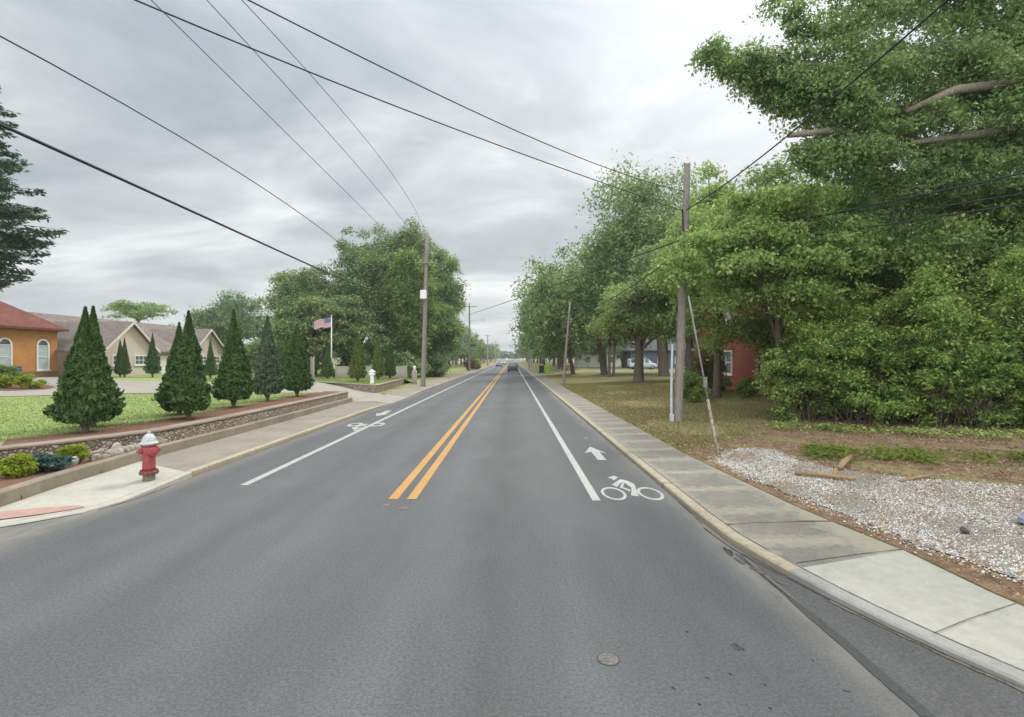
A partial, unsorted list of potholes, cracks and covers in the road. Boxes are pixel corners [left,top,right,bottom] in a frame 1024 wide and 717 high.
manhole cover [597,652,620,666]
